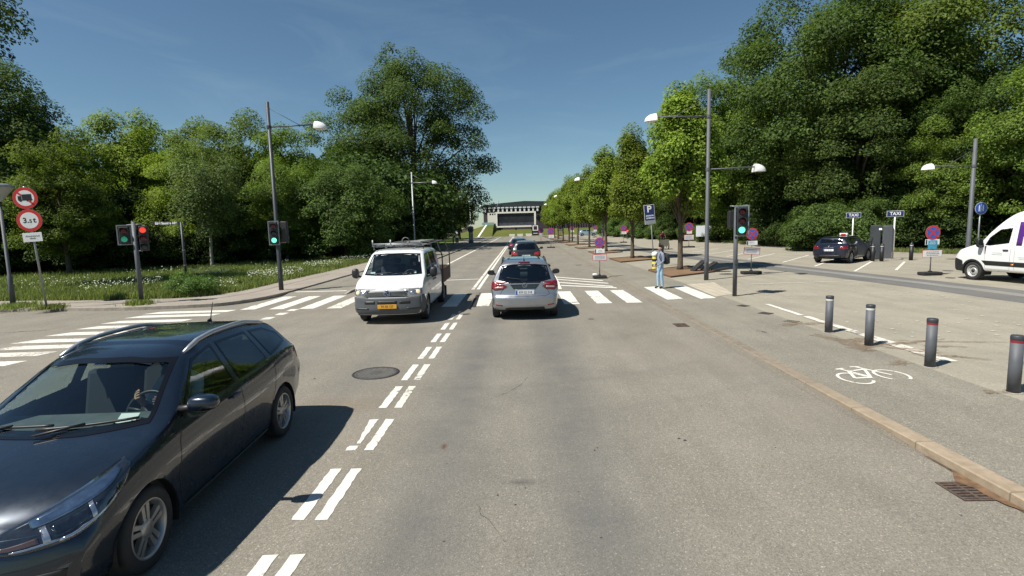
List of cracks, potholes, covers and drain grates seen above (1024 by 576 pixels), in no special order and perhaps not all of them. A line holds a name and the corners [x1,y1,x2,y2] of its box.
drain grate [935,481,997,501]
manhole cover [352,367,400,380]
